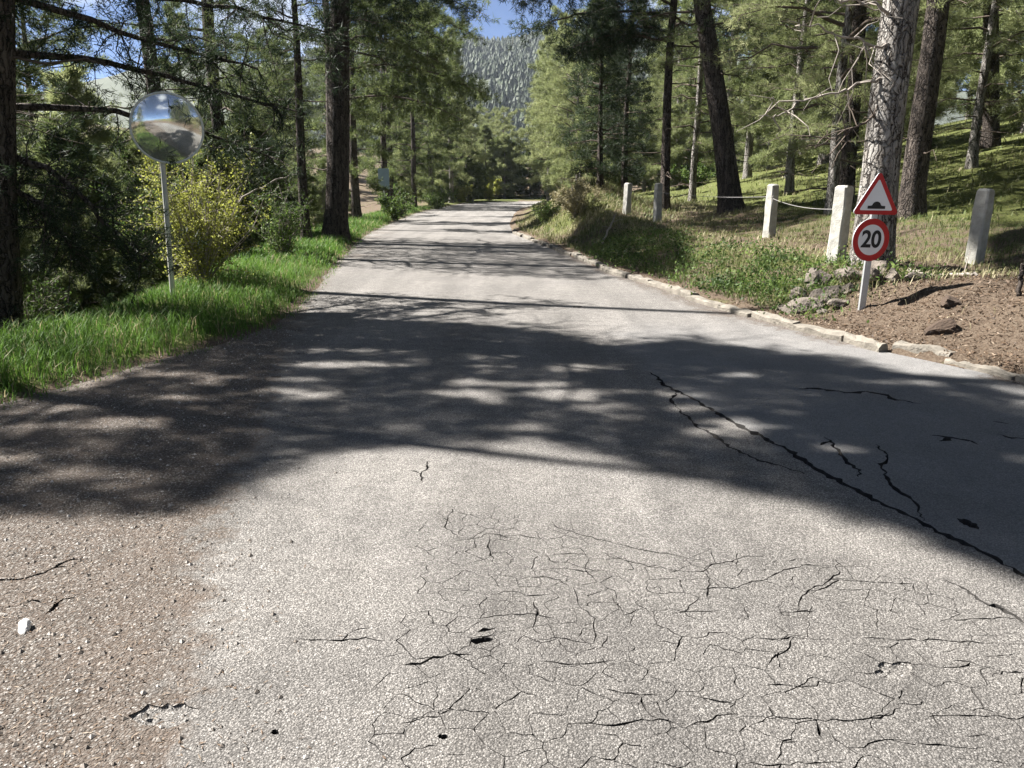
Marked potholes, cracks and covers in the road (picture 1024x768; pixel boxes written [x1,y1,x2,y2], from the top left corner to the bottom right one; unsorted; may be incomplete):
crack [804,388,922,404]
pothole [957,518,979,529]
pothole [874,661,913,680]
crack [0,558,82,581]
crack [299,506,1024,768]
crack [669,392,1024,521]
